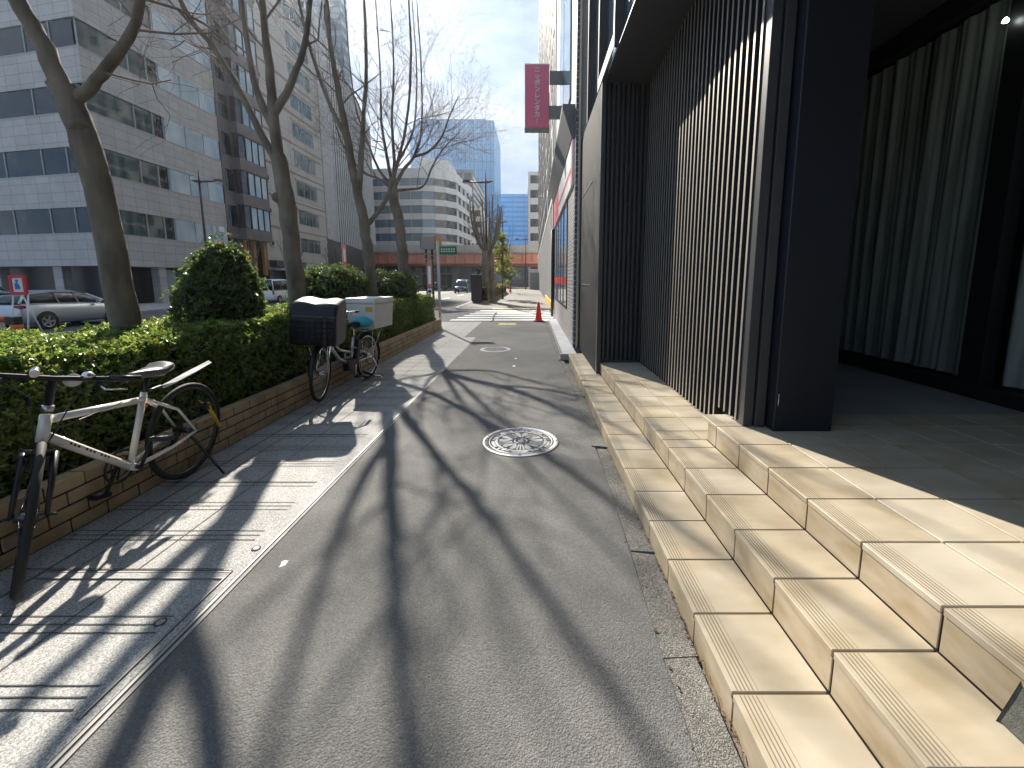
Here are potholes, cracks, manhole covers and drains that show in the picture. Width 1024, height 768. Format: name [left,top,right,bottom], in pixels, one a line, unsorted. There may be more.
manhole cover [483,427,559,457]
